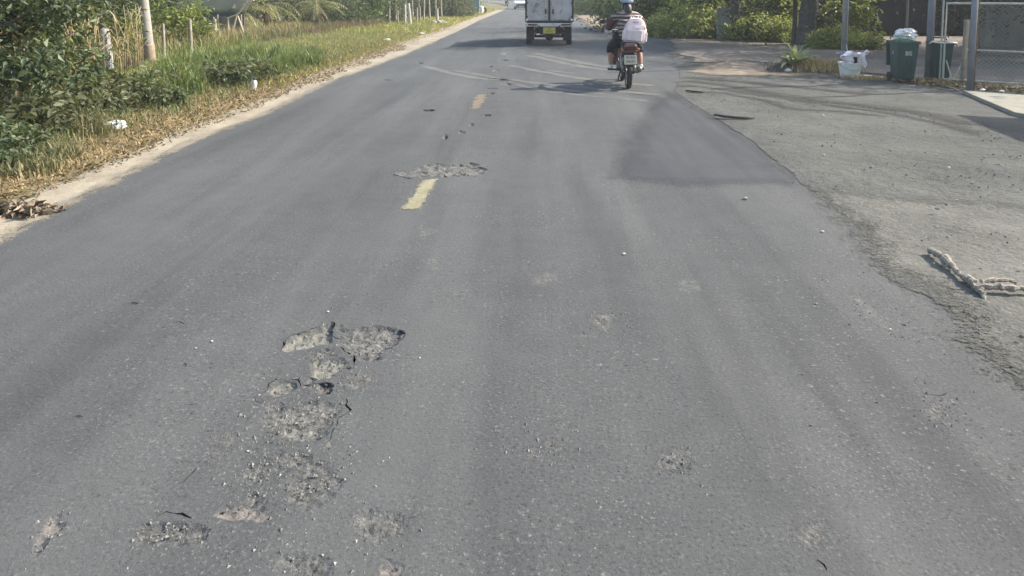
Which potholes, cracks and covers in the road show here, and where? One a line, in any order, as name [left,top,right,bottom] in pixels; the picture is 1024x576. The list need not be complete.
pothole [281,322,334,352]
pothole [31,509,67,559]
pothole [213,490,275,524]
pothole [316,382,334,395]
pothole [264,380,298,397]
